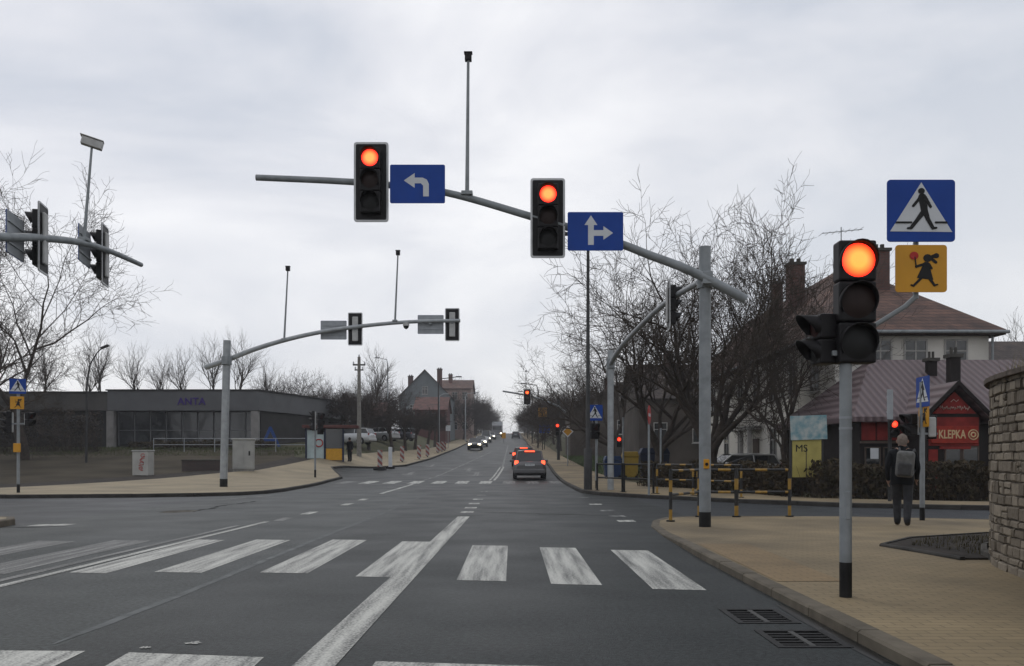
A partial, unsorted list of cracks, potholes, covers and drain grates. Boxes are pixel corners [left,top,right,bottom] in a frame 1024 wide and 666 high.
drain grate [719,609,802,624]
drain grate [754,630,854,648]
